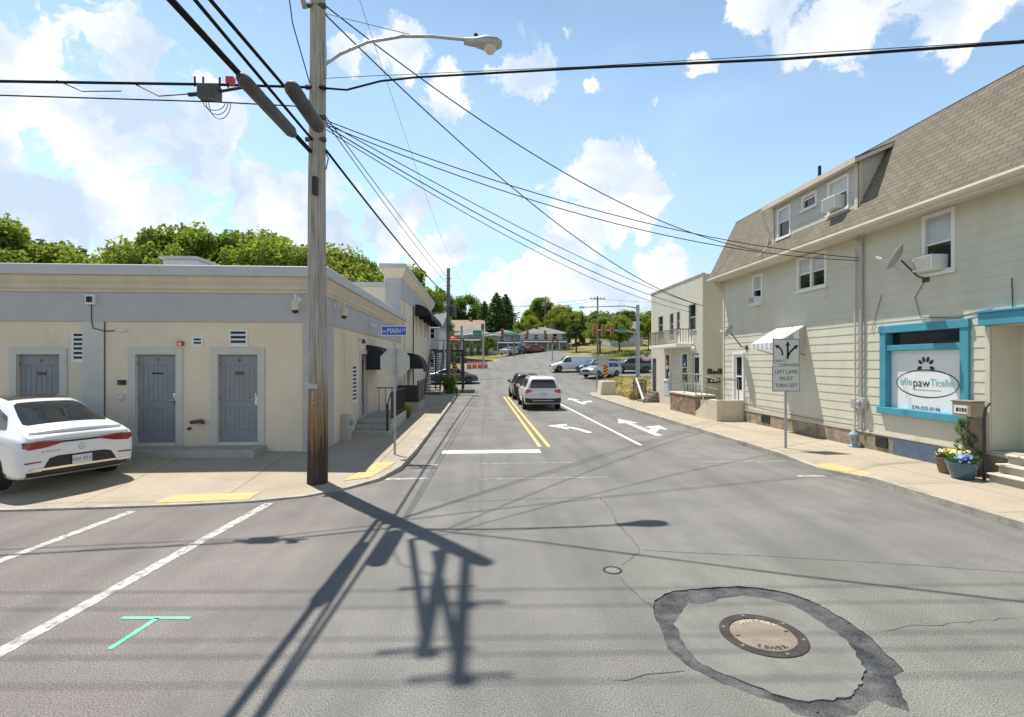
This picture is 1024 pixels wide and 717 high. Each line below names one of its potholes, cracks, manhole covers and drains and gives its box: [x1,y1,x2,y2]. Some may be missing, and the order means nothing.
crack [498,497,651,608]
crack [628,671,680,680]
manhole cover [719,614,810,658]
manhole cover [603,566,622,574]
